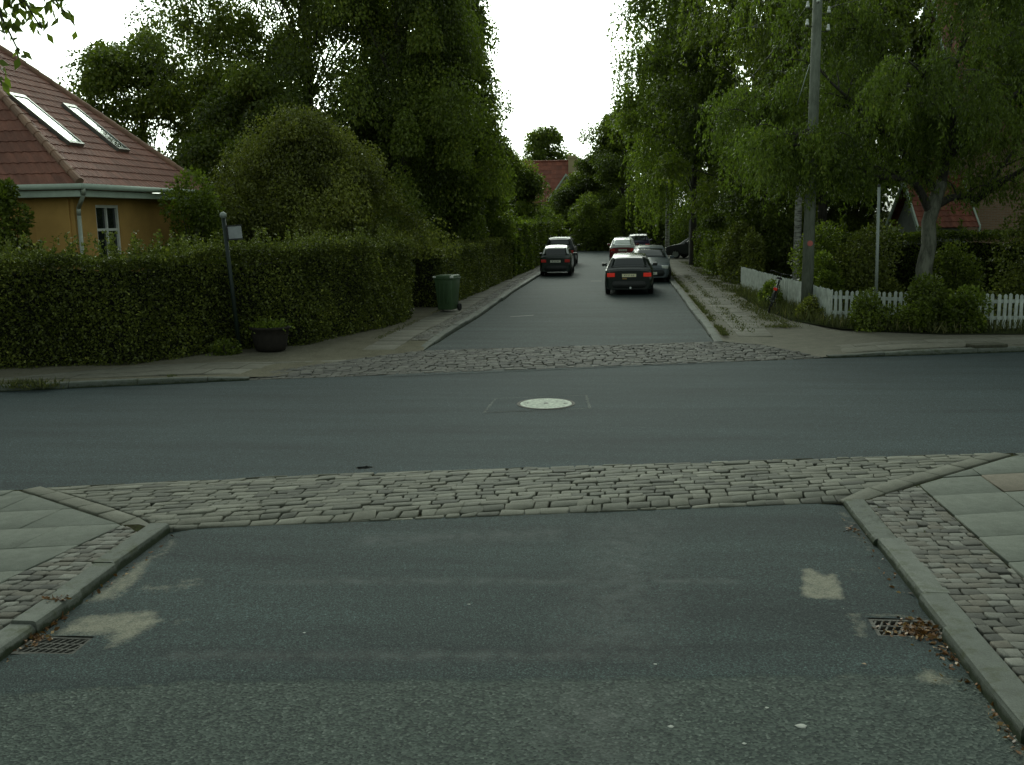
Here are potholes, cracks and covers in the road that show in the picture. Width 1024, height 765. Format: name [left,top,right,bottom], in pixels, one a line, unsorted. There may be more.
manhole cover [517,398,575,410]
drain grate [868,618,942,640]
drain grate [11,636,93,655]
